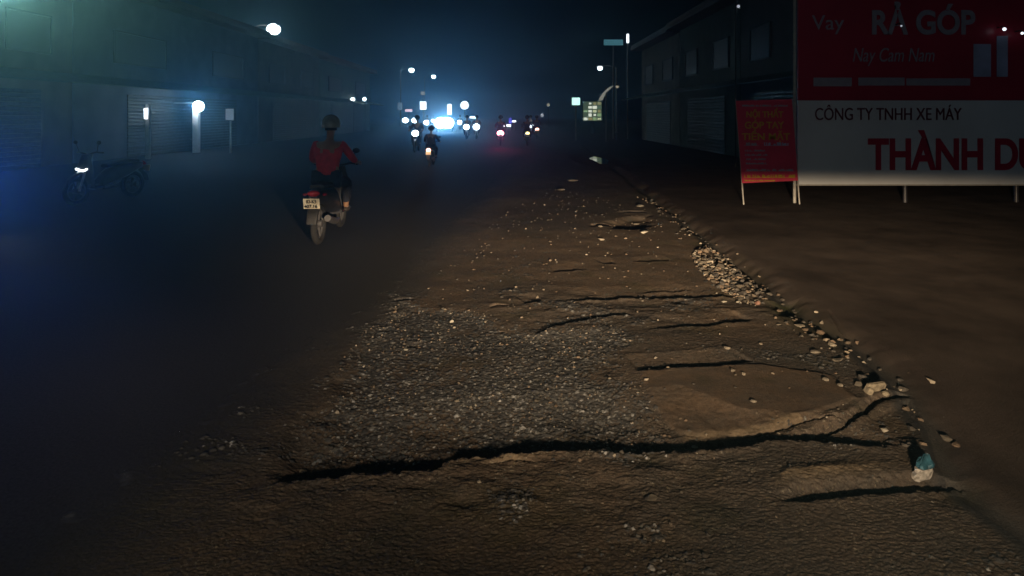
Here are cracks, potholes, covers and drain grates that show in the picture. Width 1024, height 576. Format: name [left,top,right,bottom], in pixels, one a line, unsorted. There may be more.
crack [548,259,677,272]
crack [633,358,755,371]
crack [269,391,913,486]
crack [775,473,971,503]
crack [489,287,756,335]
pothole [600,214,656,229]
pothole [310,302,659,466]
